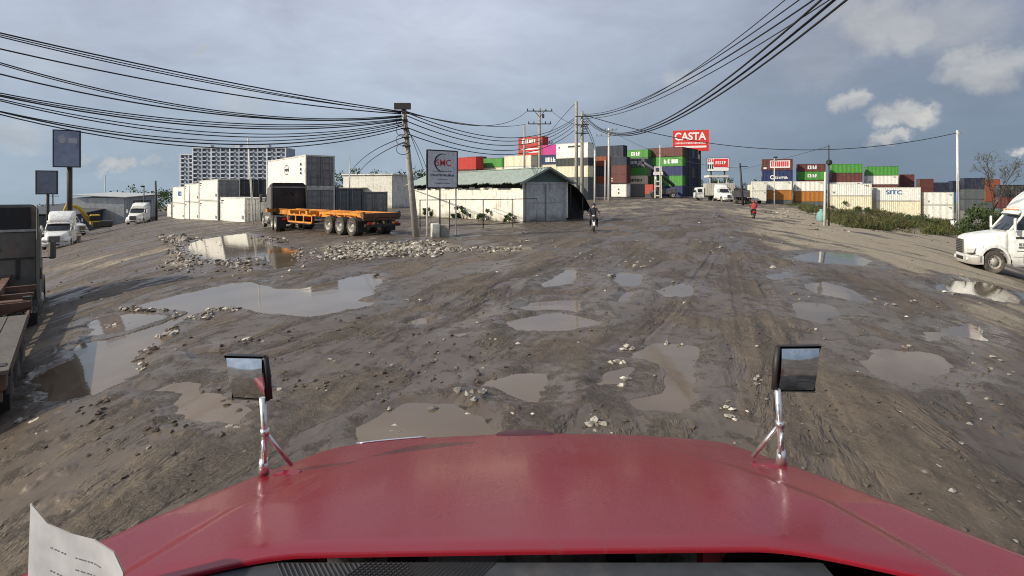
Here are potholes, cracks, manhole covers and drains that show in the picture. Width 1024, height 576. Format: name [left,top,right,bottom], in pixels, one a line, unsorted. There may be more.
pothole [785,276,895,307]
pothole [487,293,624,331]
pothole [577,334,731,424]
pothole [820,336,994,396]
pothole [916,275,1024,306]
pothole [179,232,310,269]
pothole [11,270,395,414]
pothole [106,366,285,438]
pothole [780,248,889,267]
pothole [640,278,711,298]
pothole [525,267,593,288]
pothole [764,295,875,326]
